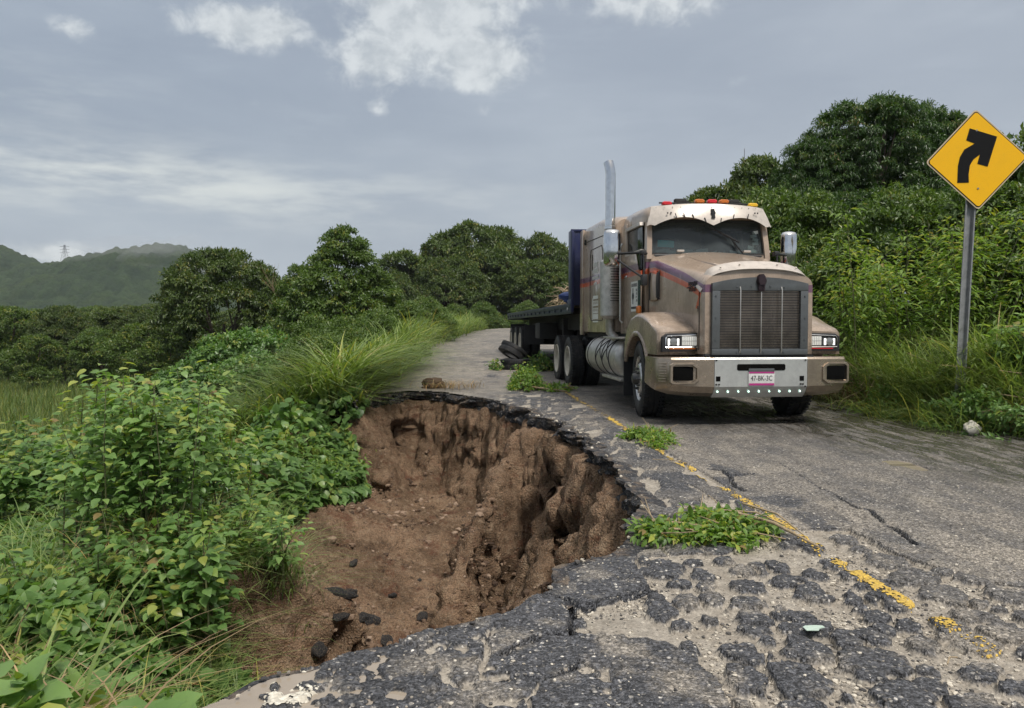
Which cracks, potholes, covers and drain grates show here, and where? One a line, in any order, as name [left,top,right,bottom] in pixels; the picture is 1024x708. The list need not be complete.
crack [437,584,655,708]
crack [704,459,919,545]
